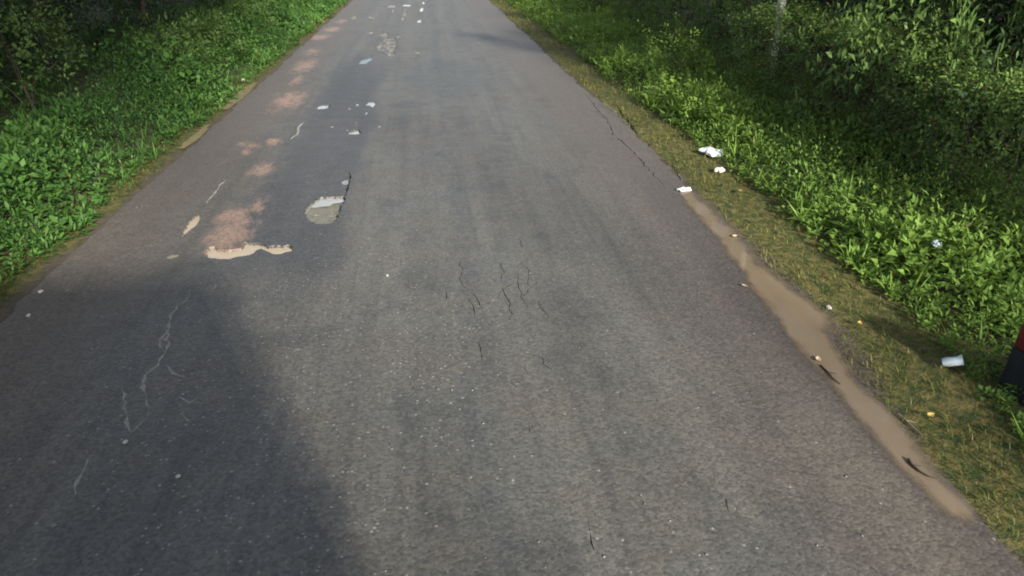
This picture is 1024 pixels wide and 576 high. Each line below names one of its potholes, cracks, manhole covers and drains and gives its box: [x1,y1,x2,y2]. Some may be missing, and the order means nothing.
crack [446,234,560,462]
pothole [204,242,295,259]
crack [588,98,685,185]
pothole [304,196,346,224]
pothole [377,37,398,56]
crack [69,285,216,502]
